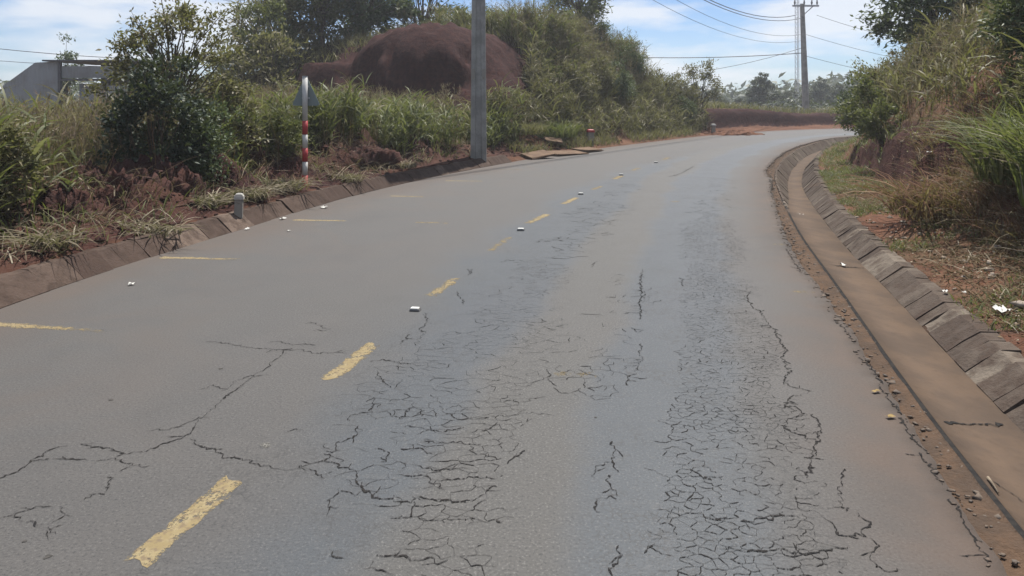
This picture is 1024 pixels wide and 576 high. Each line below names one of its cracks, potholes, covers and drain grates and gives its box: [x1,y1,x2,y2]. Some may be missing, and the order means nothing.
crack [644,215,898,576]
crack [456,184,641,304]
crack [0,269,661,576]
